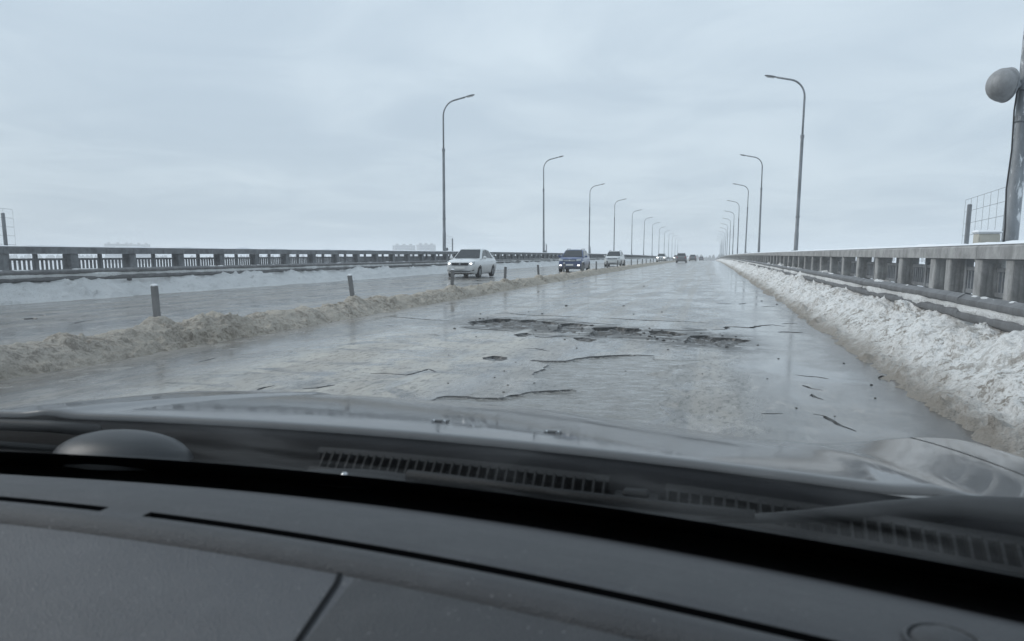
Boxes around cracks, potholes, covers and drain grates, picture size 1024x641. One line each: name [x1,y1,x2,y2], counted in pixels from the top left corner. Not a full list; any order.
pothole [468,318,556,329]
crack [799,375,855,431]
pothole [550,323,588,333]
pothole [586,327,642,337]
crack [386,313,802,351]
